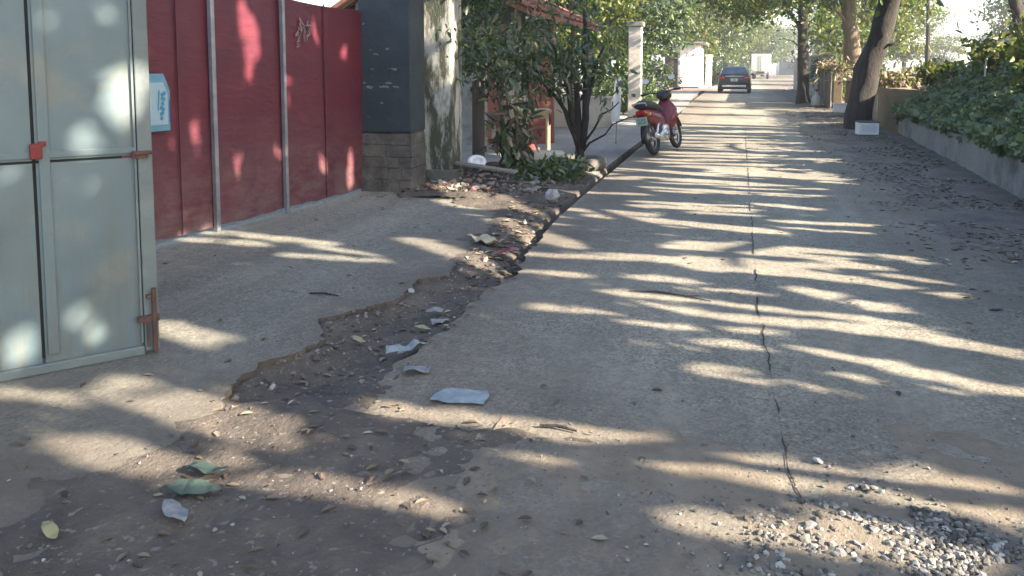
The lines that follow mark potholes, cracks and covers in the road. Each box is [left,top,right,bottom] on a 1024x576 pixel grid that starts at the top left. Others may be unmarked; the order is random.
pothole [229,273,500,410]
crack [745,135,802,504]
